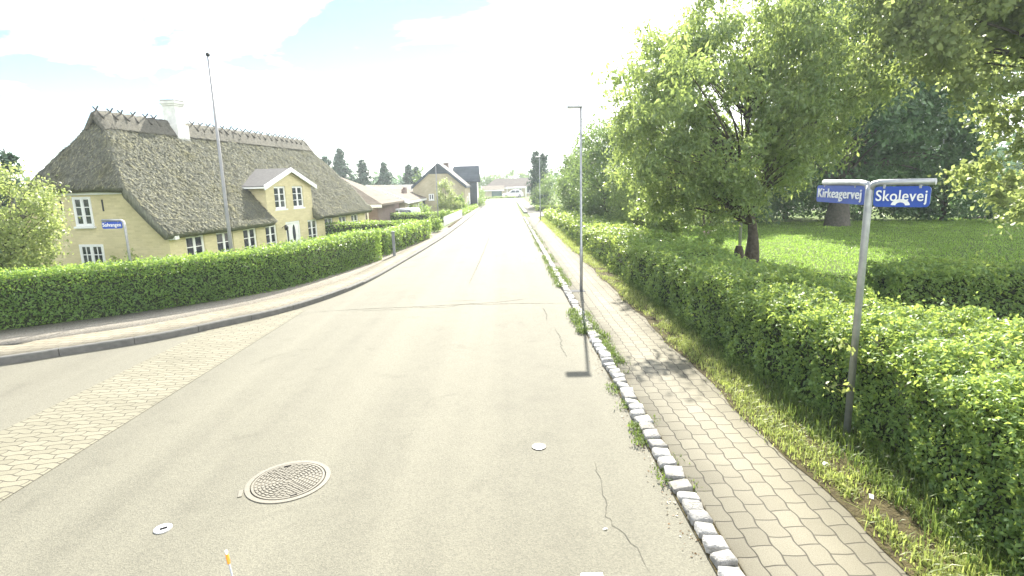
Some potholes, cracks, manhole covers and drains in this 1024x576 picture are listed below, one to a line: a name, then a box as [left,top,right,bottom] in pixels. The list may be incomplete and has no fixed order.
crack [324,299,567,356]
crack [594,461,650,572]
utility cover [153,523,173,534]
manhole cover [237,460,331,504]
